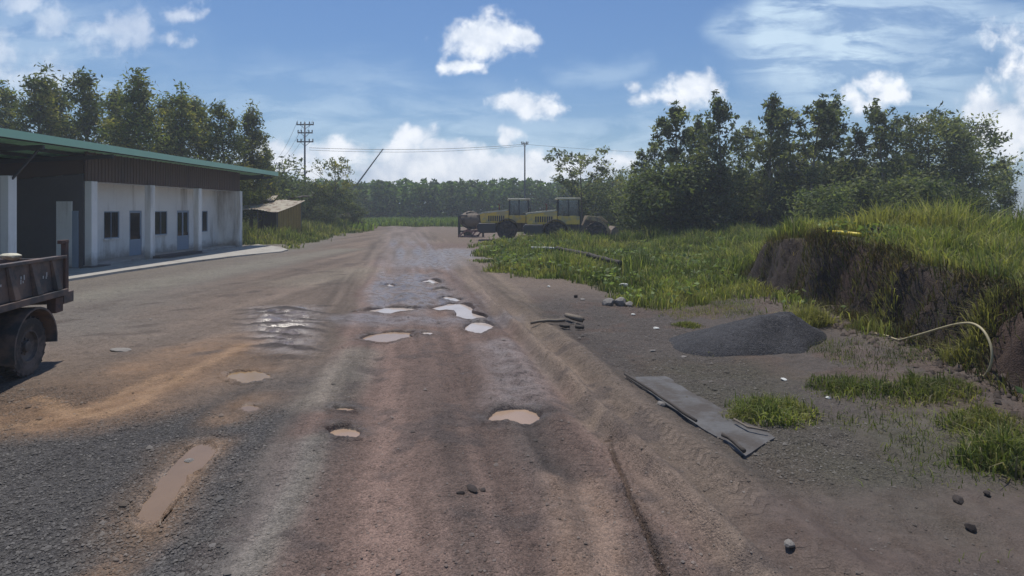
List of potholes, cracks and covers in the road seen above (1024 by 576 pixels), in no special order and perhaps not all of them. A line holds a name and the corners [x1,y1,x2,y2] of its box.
pothole [353,329,421,344]
pothole [321,402,366,414]
pothole [478,401,553,427]
pothole [458,318,501,334]
pothole [313,418,373,441]
pothole [352,304,426,314]
pothole [426,302,491,320]
pothole [126,435,225,535]
pothole [217,367,280,386]
